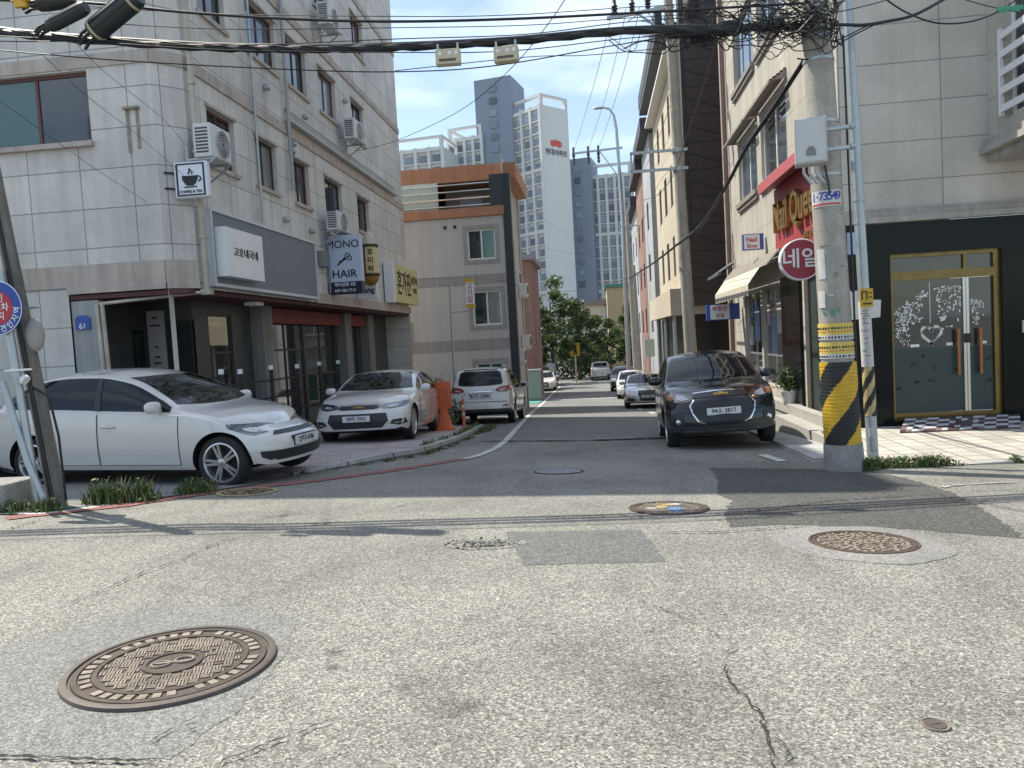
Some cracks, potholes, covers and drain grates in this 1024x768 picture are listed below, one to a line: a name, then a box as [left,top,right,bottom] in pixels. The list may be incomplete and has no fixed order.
manhole cover [629,501,710,515]
manhole cover [216,487,278,496]
crack [209,719,330,766]
crack [629,595,794,768]
manhole cover [57,626,277,712]
pothole [443,537,526,550]
